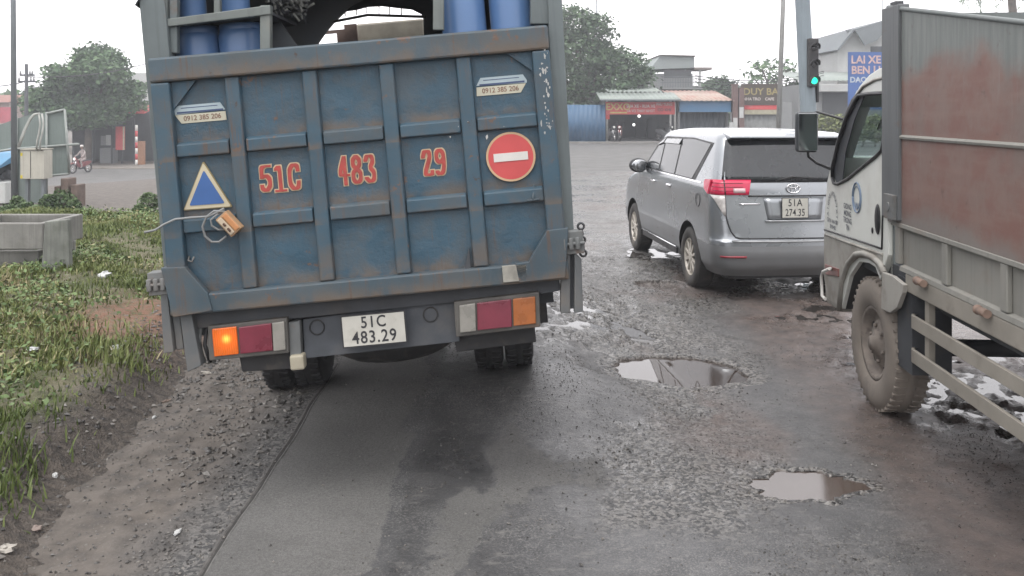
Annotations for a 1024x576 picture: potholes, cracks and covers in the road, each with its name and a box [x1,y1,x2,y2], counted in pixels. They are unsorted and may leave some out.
pothole [735,465,889,506]
pothole [594,352,769,392]
